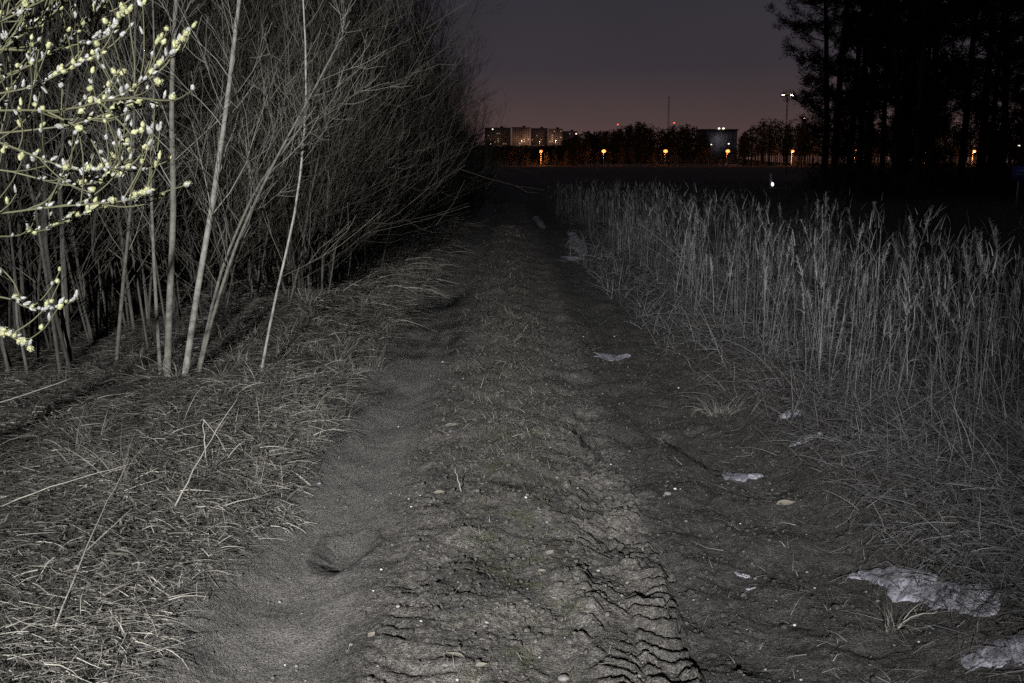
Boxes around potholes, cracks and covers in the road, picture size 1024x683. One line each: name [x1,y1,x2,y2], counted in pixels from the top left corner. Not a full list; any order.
crack [567,422,603,461]
pothole [305,528,387,580]
crack [662,438,725,476]
